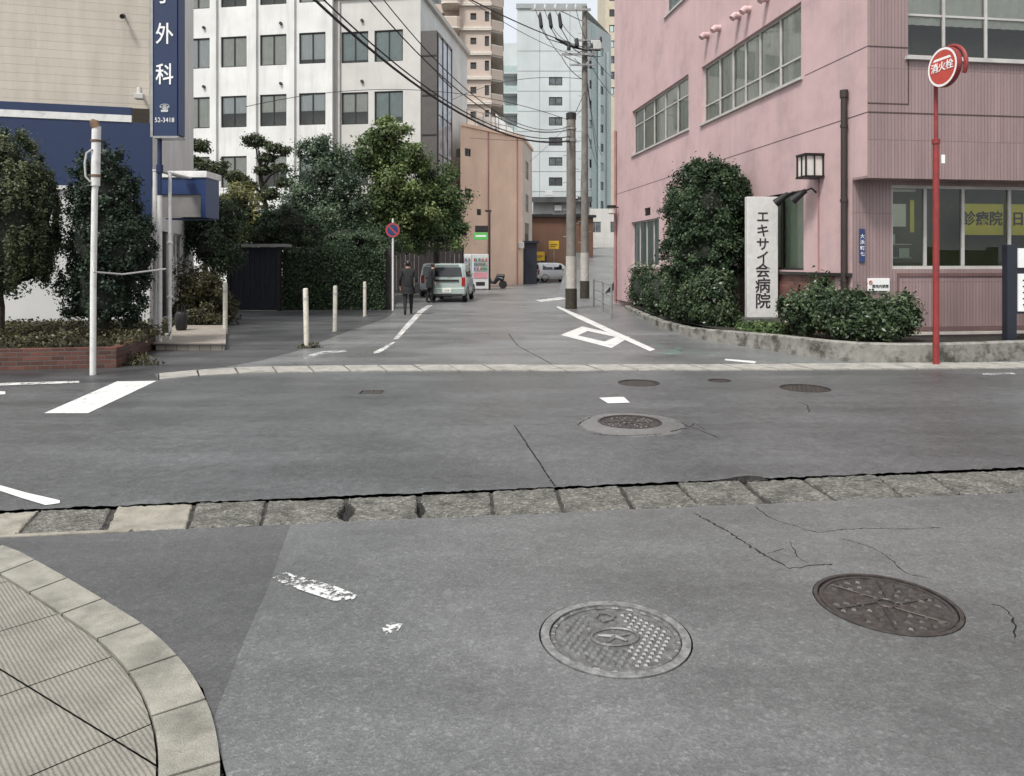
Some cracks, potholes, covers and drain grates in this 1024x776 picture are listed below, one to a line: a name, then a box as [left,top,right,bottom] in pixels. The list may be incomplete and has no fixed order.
crack [514,417,719,488]
crack [991,604,1017,639]
manhole cover [779,384,831,393]
pothole [338,503,355,522]
crack [694,506,940,579]
manhole cover [541,601,691,679]
manhole cover [598,415,662,429]
manhole cover [813,573,965,637]
